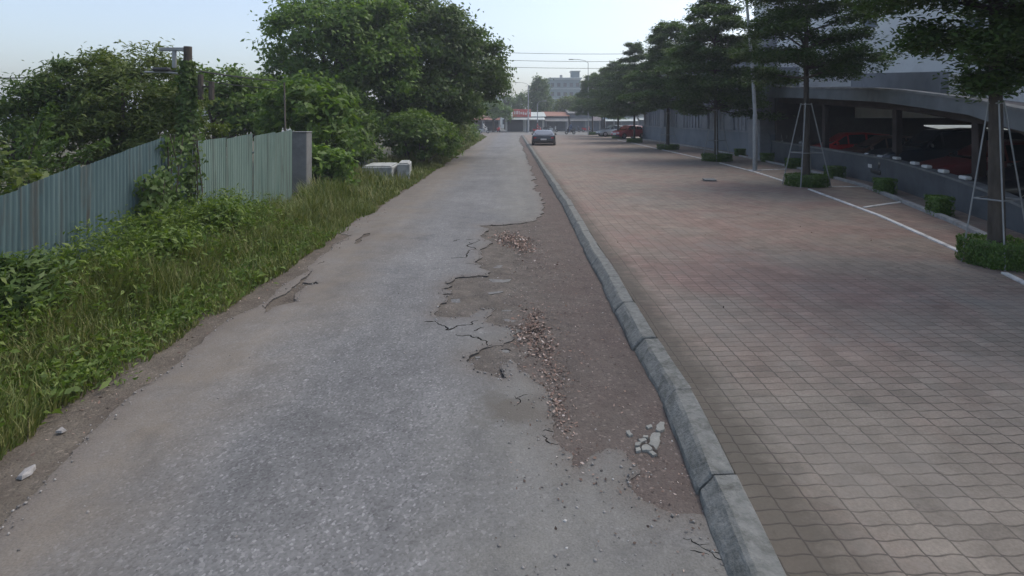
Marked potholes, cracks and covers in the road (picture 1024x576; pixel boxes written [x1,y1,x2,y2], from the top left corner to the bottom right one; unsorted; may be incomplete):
pothole [434,275,535,330]
pothole [476,220,547,279]
crack [683,538,722,560]
crack [425,320,490,346]
pothole [468,339,531,378]
